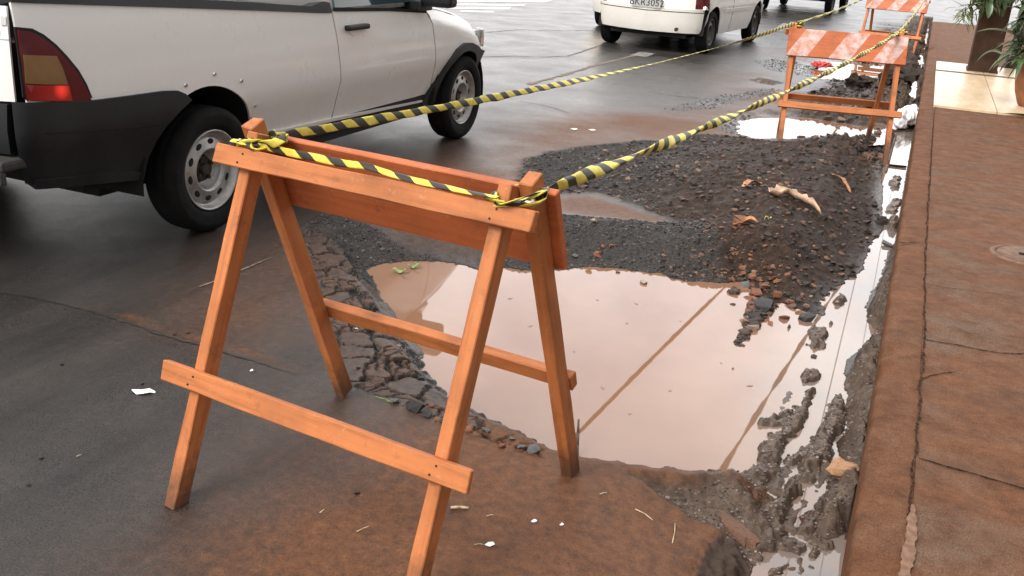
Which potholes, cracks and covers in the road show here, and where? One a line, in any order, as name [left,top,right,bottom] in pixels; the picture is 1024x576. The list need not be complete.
crack [919,458,1024,489]
crack [311,242,424,389]
manhole cover [989,245,1024,265]
pothole [364,259,799,471]
pothole [726,112,857,138]
crack [926,339,1024,354]
